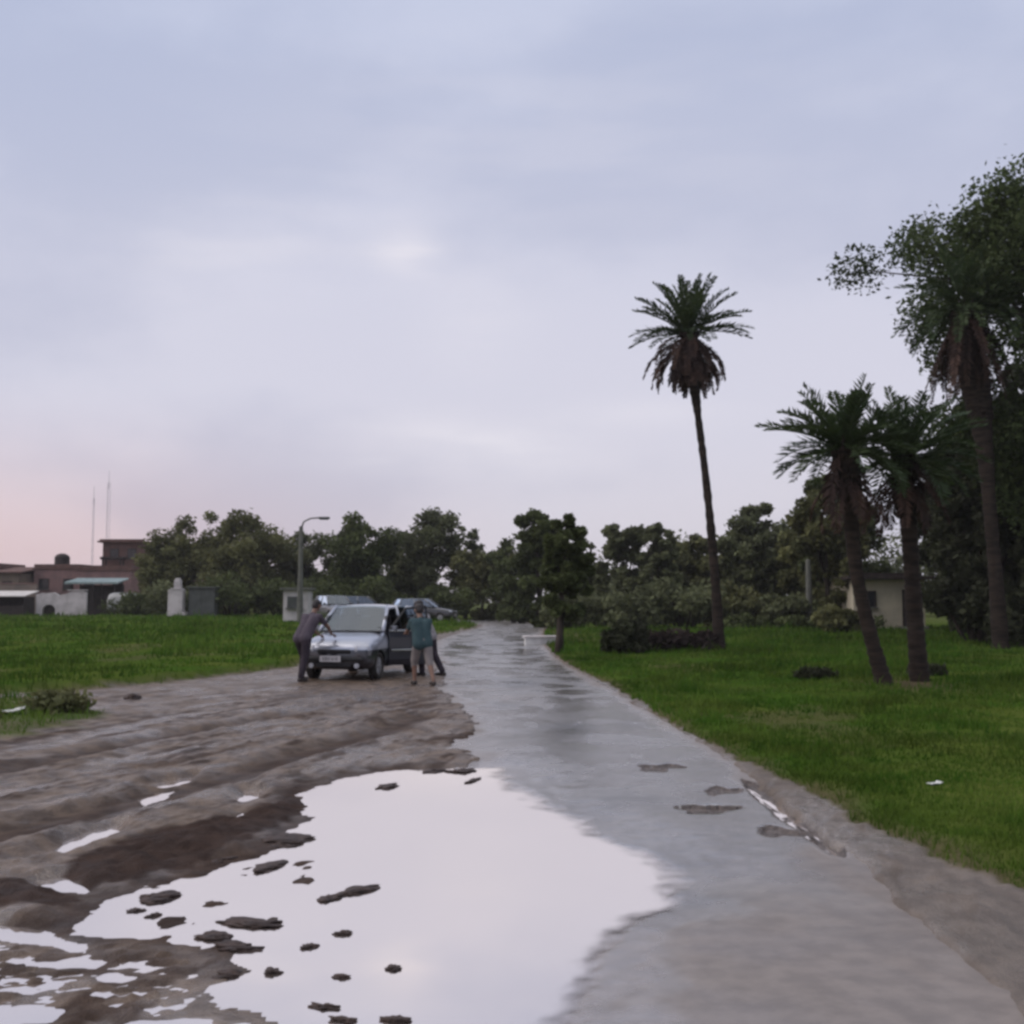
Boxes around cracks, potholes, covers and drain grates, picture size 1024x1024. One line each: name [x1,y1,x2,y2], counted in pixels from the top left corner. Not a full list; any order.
pothole [704,785,745,796]
pothole [637,764,687,772]
pothole [674,804,743,814]
